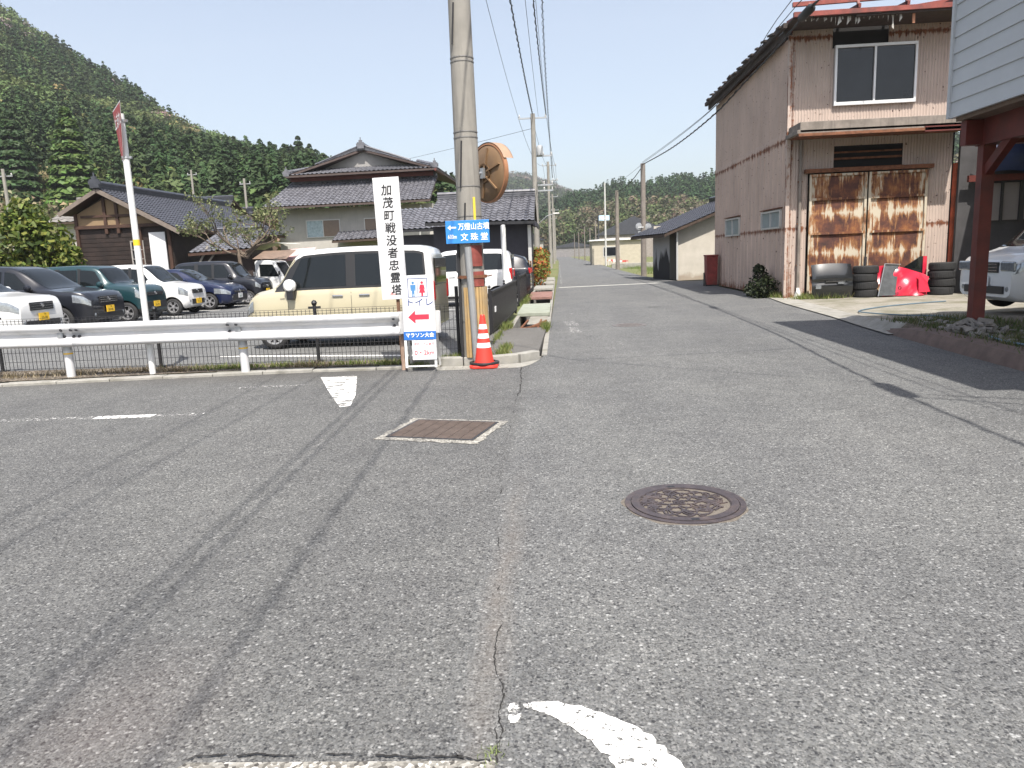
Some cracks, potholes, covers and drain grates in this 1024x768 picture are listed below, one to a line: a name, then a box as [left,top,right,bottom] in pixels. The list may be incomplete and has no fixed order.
manhole cover [621,484,749,526]
